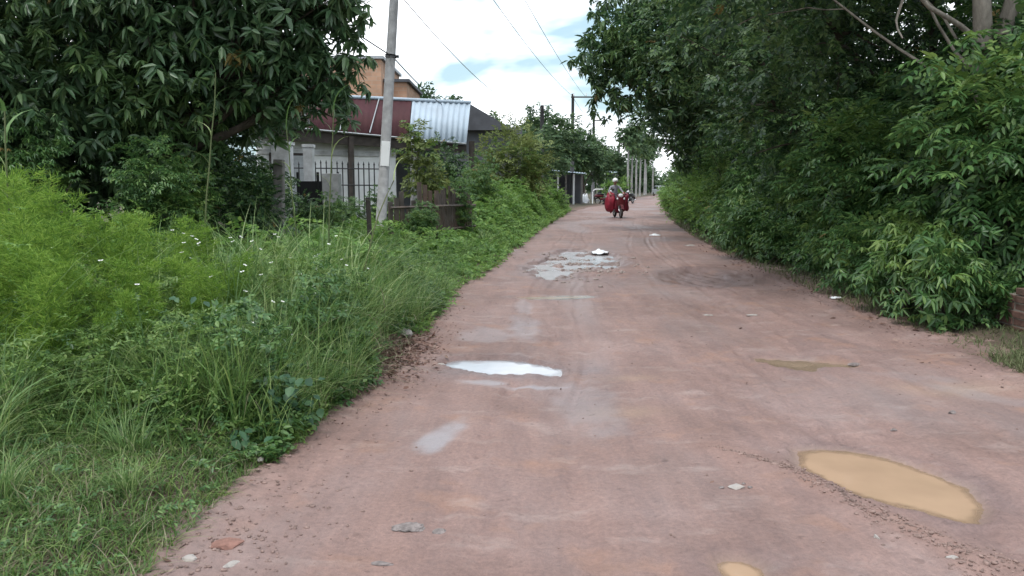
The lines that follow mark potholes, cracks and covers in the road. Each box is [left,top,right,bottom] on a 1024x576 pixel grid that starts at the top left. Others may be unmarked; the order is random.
pothole [442,356,565,377]
pothole [785,444,993,525]
pothole [522,249,627,280]
pothole [748,356,863,372]
pothole [708,552,775,576]
